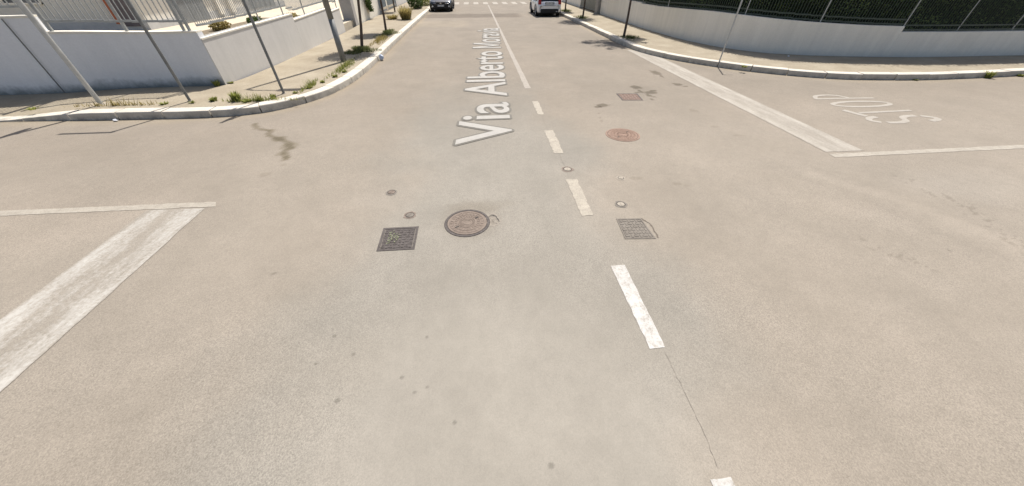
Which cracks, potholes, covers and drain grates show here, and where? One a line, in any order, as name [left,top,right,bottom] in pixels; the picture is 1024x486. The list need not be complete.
manhole cover [605,128,640,142]
drain grate [376,226,419,251]
manhole cover [444,209,490,237]
drain grate [616,218,656,239]
